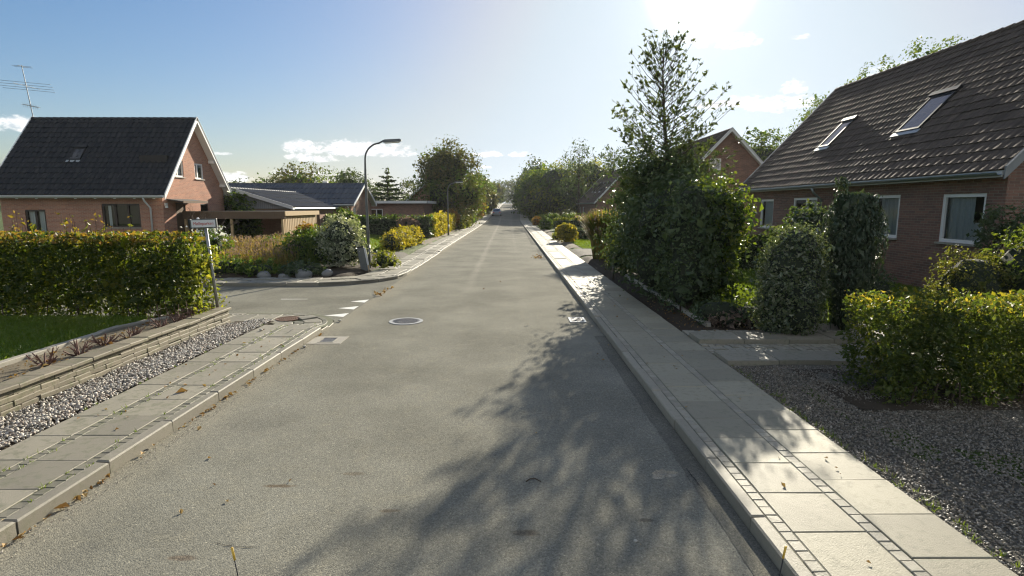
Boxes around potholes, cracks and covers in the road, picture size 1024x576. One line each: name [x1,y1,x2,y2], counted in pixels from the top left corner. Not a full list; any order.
drain grate [306,336,349,344]
